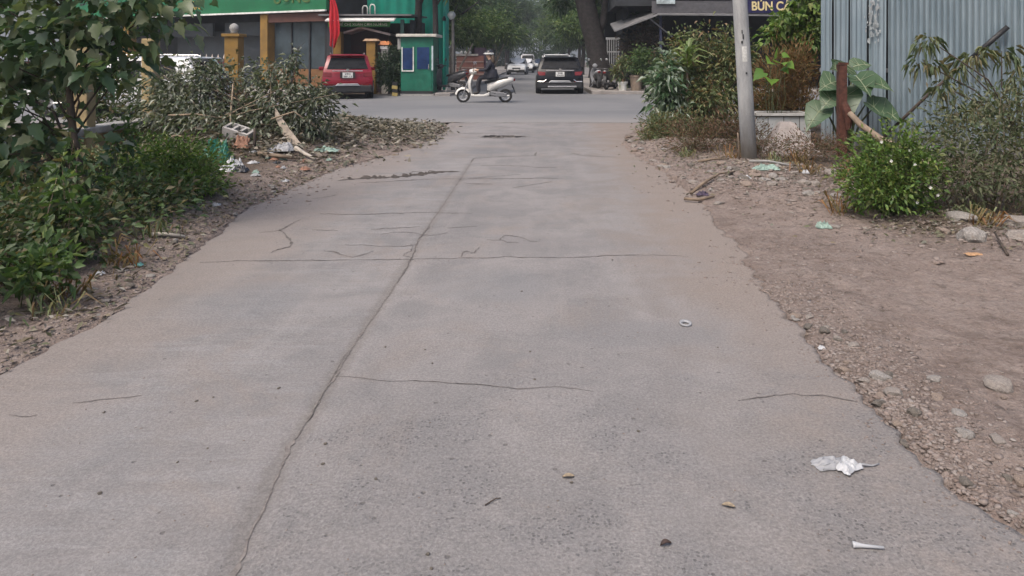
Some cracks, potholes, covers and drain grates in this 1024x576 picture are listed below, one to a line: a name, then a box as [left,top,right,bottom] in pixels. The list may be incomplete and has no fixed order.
crack [261,220,299,253]
crack [362,212,470,258]
crack [738,393,858,402]
crack [320,152,562,198]
crack [335,376,589,391]
